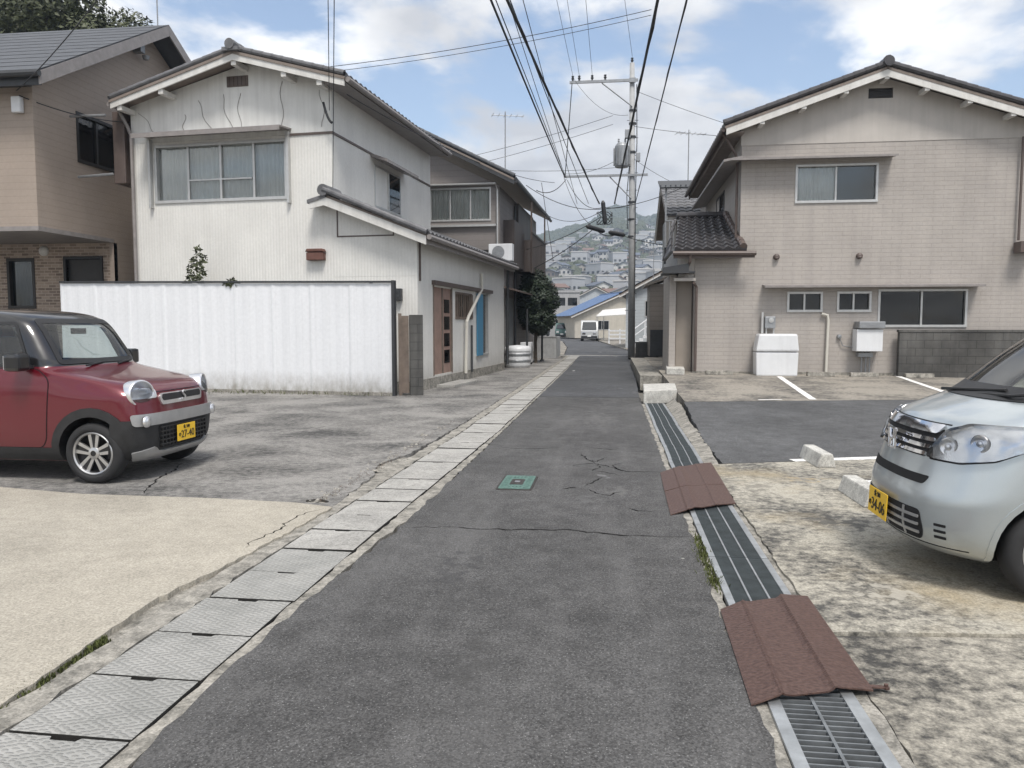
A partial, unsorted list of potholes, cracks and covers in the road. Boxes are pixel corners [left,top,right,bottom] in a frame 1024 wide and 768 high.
manhole cover [496,475,538,491]
drain grate [766,688,902,768]
drain grate [709,557,791,606]
drain grate [668,459,703,469]
crack [563,448,650,512]
drain grate [663,445,701,460]
drain grate [658,433,692,447]
drain grate [650,416,678,424]
crack [417,526,655,537]
drain grate [688,504,767,559]
drain grate [653,424,684,434]
